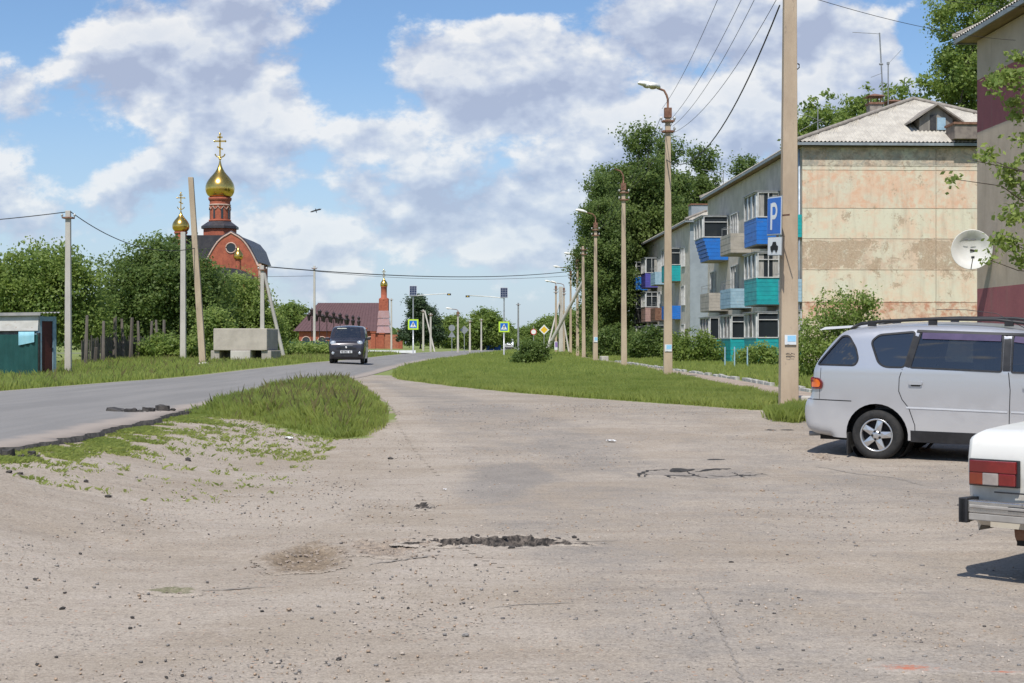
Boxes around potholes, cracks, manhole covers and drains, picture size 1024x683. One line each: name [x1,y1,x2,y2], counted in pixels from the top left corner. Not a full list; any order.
pothole [408,502,439,511]
pothole [624,467,772,480]
pothole [389,534,602,549]
pothole [233,541,353,576]
